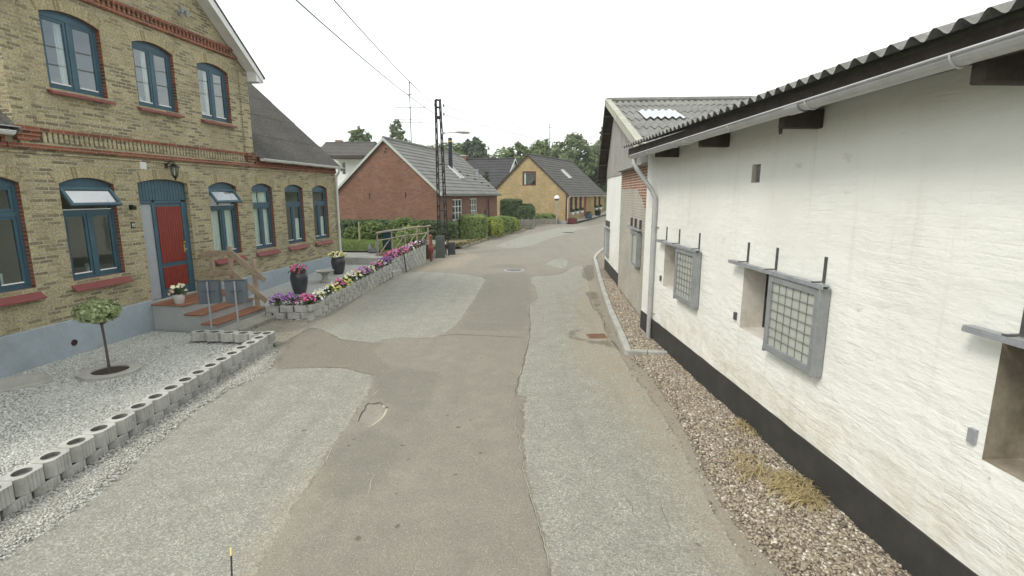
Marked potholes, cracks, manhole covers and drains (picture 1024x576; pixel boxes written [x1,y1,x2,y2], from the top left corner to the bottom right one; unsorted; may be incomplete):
crack [514,307,550,572]
pothole [358,402,389,427]
